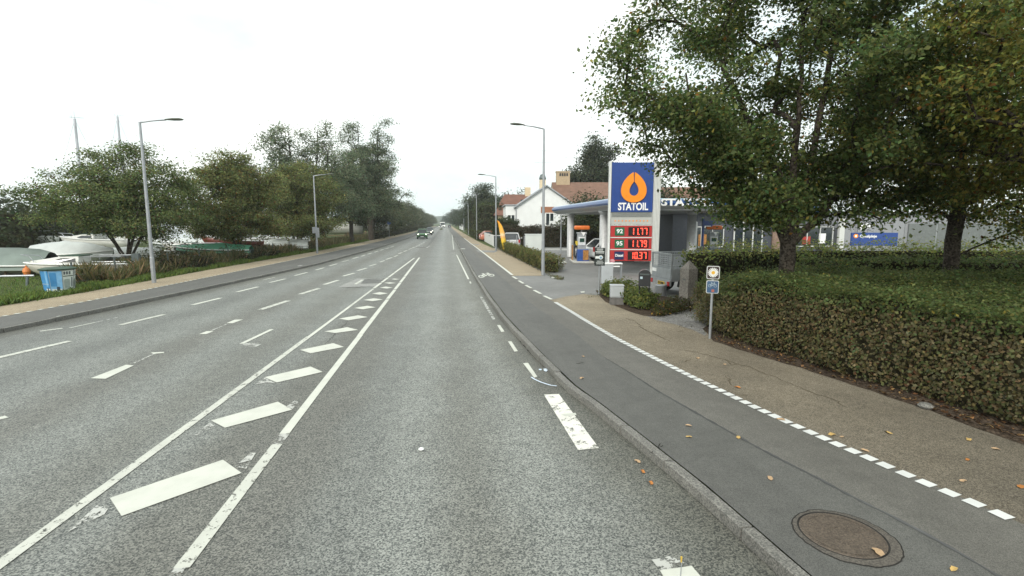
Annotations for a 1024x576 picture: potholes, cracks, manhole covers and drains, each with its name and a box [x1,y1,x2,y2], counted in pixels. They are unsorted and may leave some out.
manhole cover [791,509,905,568]
